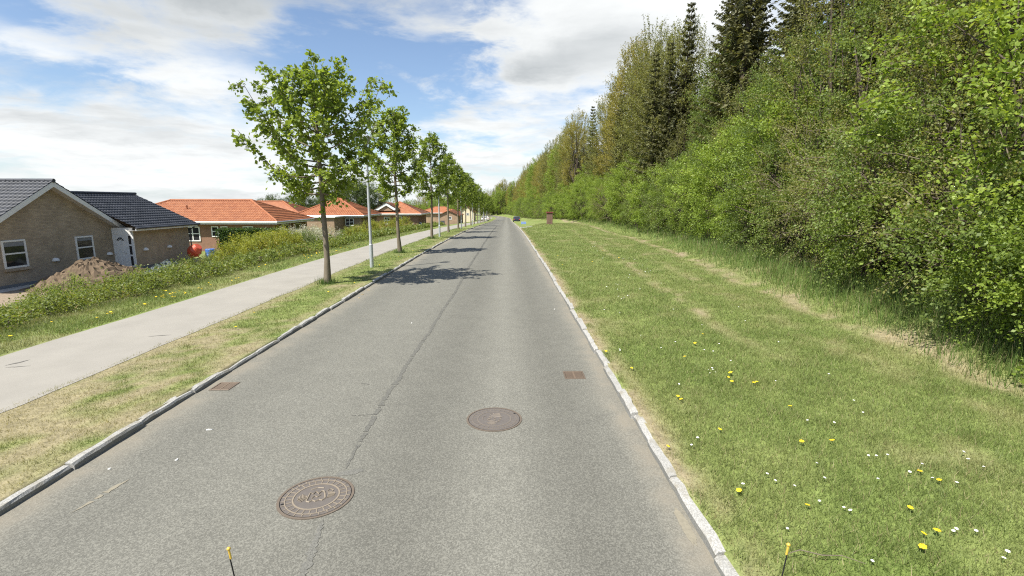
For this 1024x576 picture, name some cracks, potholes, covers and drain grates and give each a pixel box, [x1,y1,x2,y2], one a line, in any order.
crack [345,226,497,469]
manhole cover [467,407,522,432]
manhole cover [276,476,354,520]
drain grate [208,382,240,391]
drain grate [563,371,586,379]
